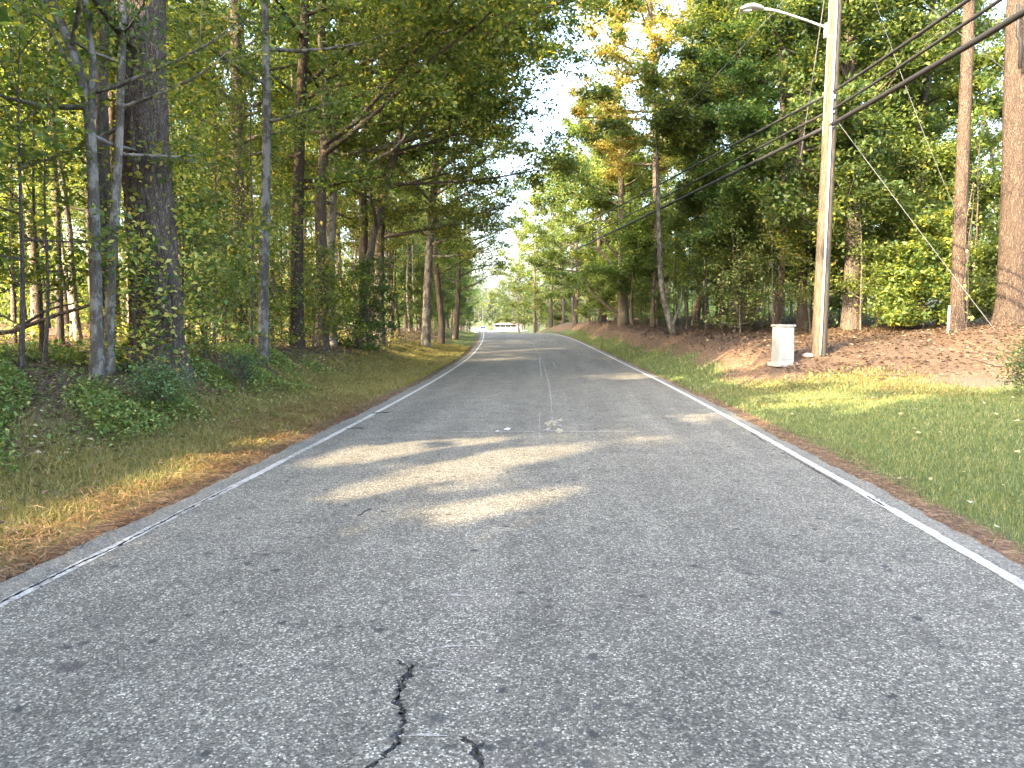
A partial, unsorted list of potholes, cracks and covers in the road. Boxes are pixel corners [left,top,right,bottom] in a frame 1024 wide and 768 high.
crack [365,594,501,768]
